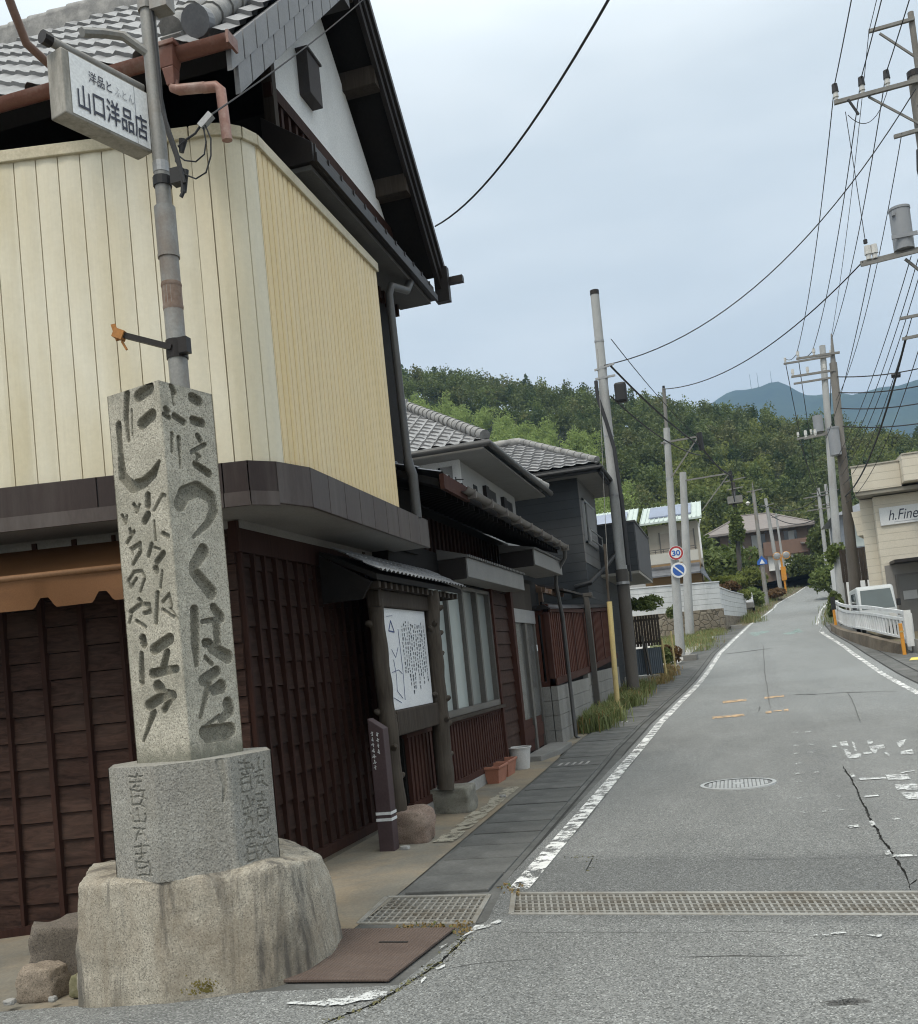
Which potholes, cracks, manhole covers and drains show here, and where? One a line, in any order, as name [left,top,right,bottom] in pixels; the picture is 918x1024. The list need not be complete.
drain grate [356,894,491,925]
crack [564,748,644,872]
drain grate [508,891,918,915]
crack [699,766,917,890]
crack [323,934,532,1024]
crack [728,646,771,711]
manhole cover [700,778,777,790]
